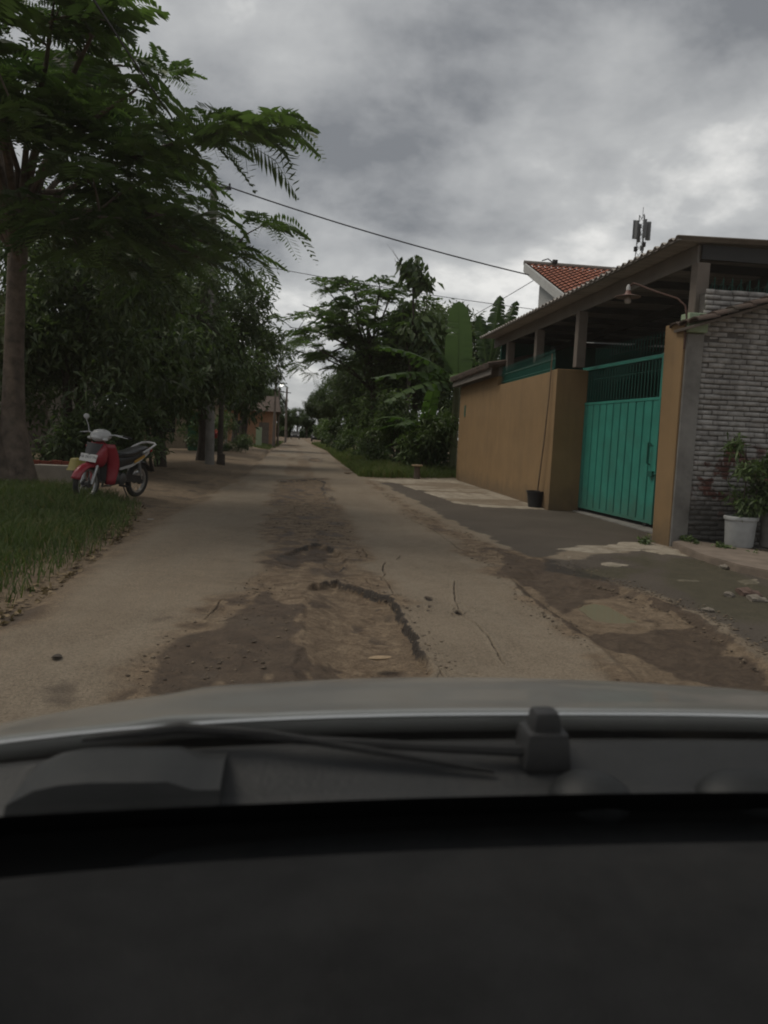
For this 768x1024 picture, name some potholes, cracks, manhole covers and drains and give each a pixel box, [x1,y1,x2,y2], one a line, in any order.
pothole [264,541,358,578]
crack [355,517,515,677]
